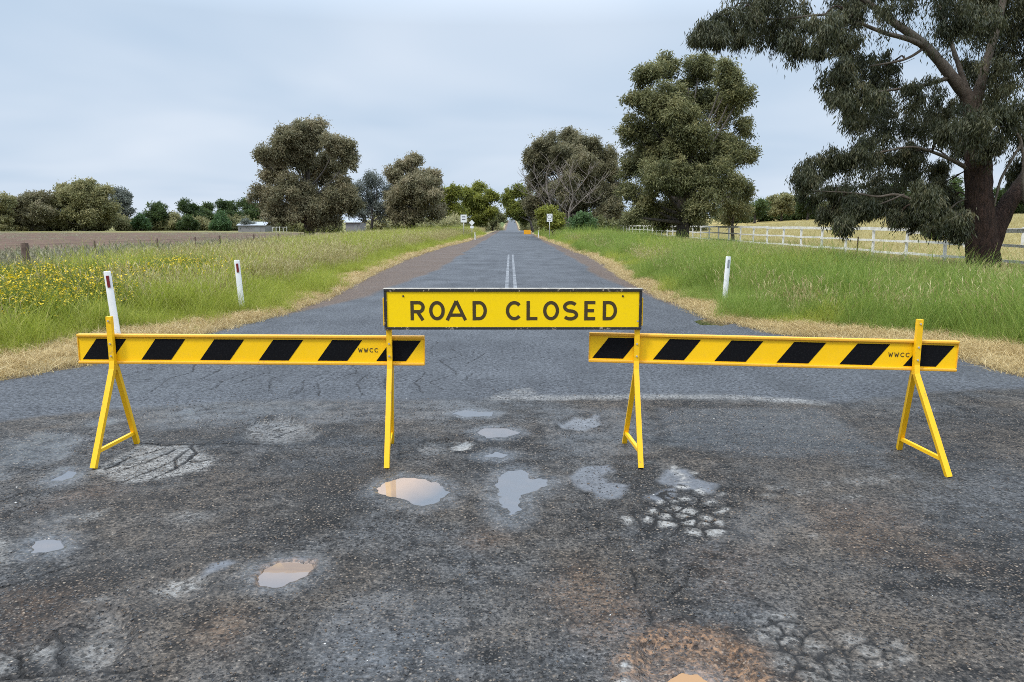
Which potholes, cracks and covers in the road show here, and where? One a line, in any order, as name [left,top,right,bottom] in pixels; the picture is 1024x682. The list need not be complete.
crack [758,616,900,680]
crack [628,484,741,538]
pothole [19,534,75,555]
pothole [245,554,323,590]
pothole [368,474,458,509]
pothole [471,426,524,439]
pothole [618,627,770,682]
